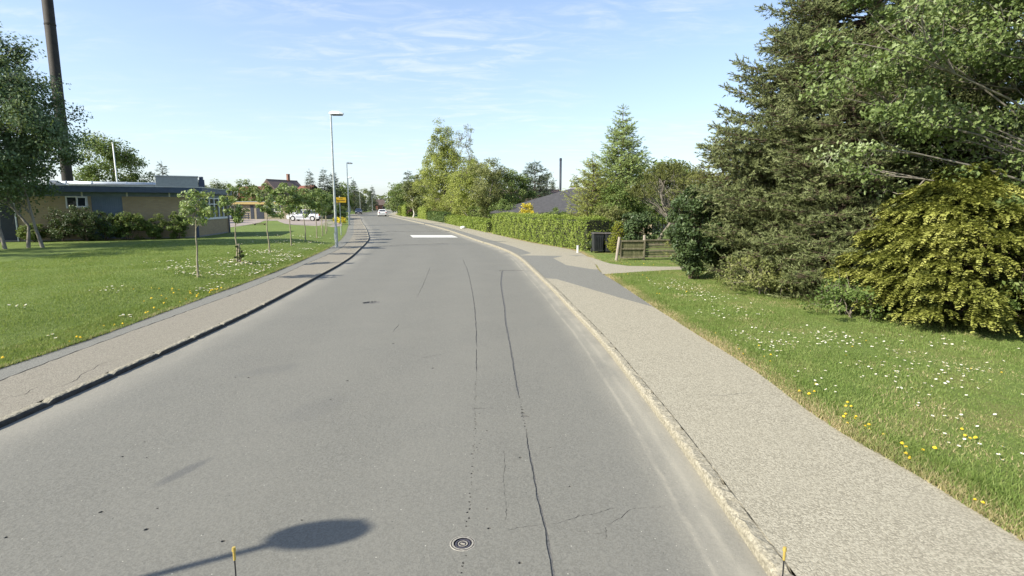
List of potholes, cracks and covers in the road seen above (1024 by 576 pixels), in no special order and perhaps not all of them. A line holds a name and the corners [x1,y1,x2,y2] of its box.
manhole cover [450,536,476,551]
crack [461,260,482,573]
crack [503,453,661,541]
